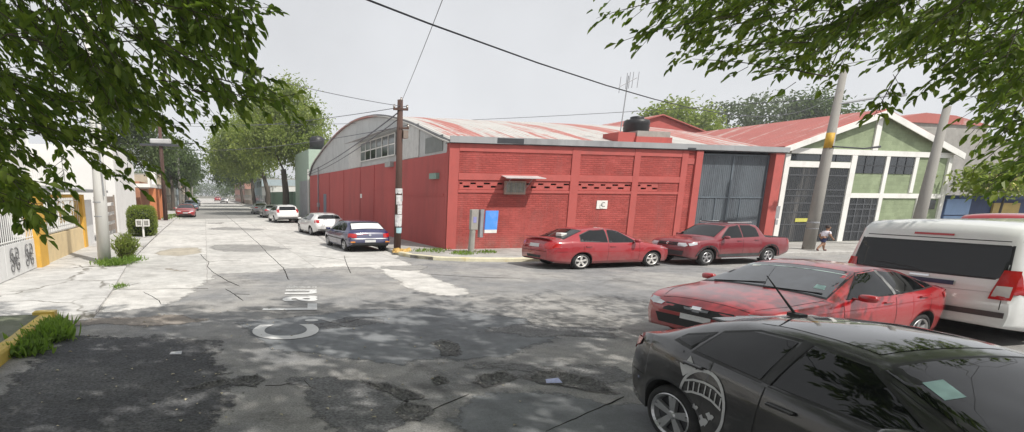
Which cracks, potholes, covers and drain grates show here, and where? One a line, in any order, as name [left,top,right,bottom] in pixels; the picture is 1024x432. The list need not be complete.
pothole [473,370,521,388]
crack [547,397,623,431]
pothole [232,373,265,387]
crack [115,255,250,304]
pothole [393,401,434,421]
pothole [431,375,449,385]
pothole [522,368,620,395]
pothole [362,380,427,403]
pothole [431,339,462,356]
